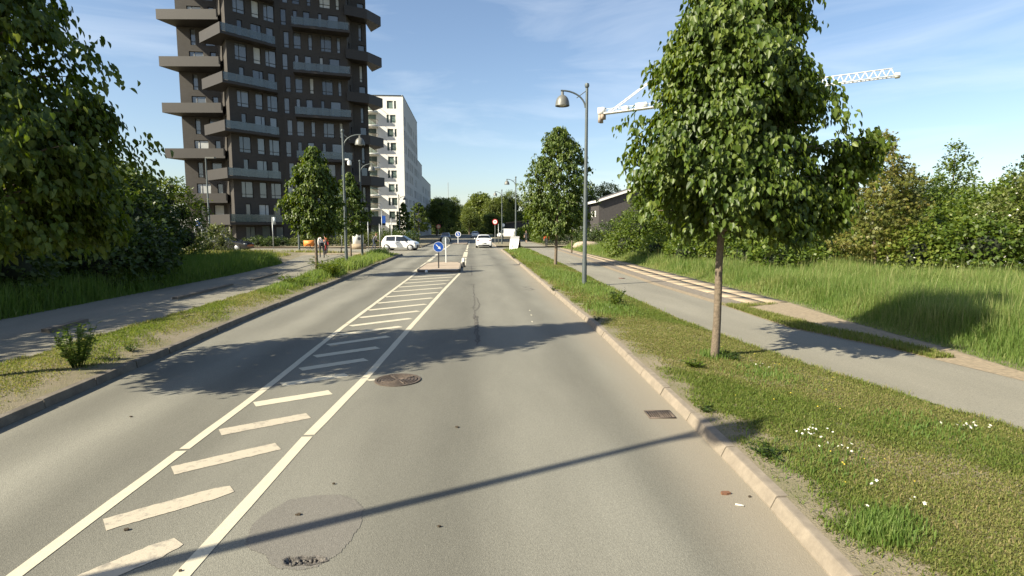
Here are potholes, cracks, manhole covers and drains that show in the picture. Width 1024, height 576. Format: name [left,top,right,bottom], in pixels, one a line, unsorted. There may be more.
crack [462,250,501,345]
pothole [282,555,329,567]
manhole cover [374,373,421,387]
drain grate [644,410,676,419]
